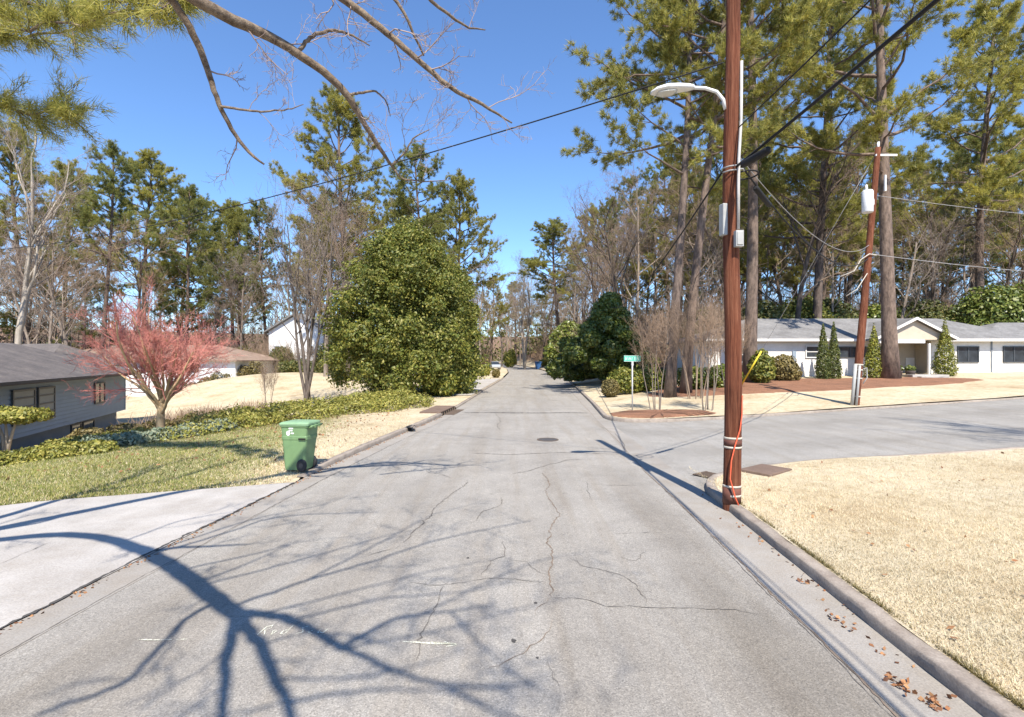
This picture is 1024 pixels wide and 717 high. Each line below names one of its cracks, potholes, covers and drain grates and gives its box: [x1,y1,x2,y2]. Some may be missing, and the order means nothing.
crack [364,470,468,557]
drain grate [692,464,792,478]
drain grate [420,405,464,415]
crack [415,428,756,684]
